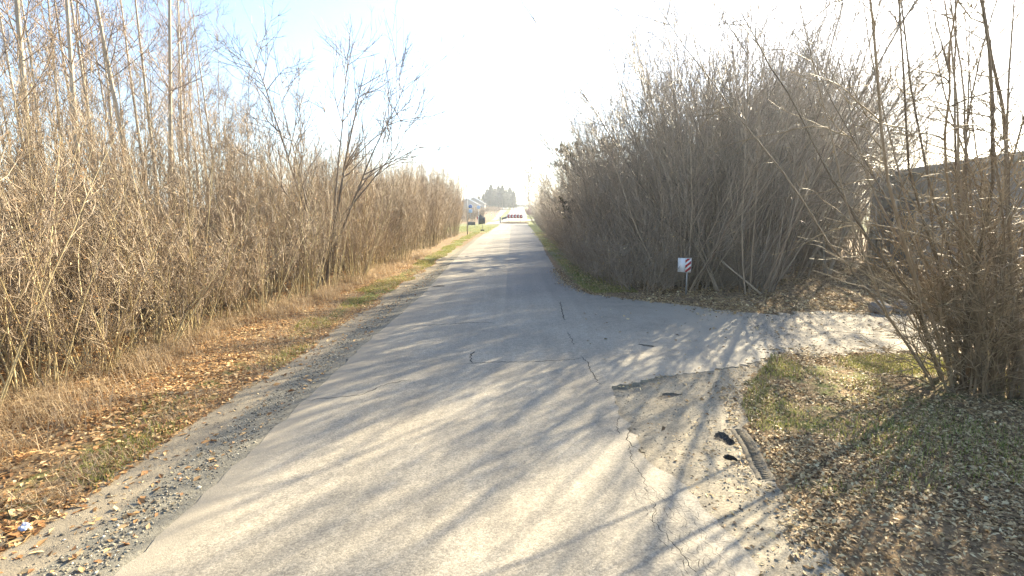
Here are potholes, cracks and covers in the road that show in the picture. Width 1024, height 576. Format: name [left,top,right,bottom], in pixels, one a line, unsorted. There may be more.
pothole [714,431,735,446]
crack [616,416,744,576]
crack [465,303,601,384]
